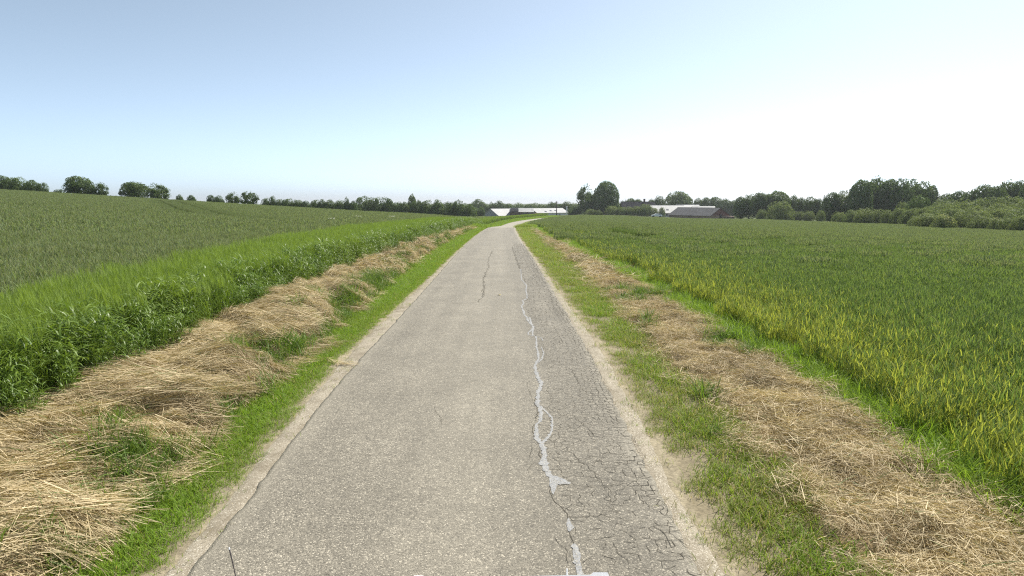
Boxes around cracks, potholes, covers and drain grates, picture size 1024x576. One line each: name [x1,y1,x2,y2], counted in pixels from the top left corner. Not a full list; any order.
crack [513,244,701,576]
